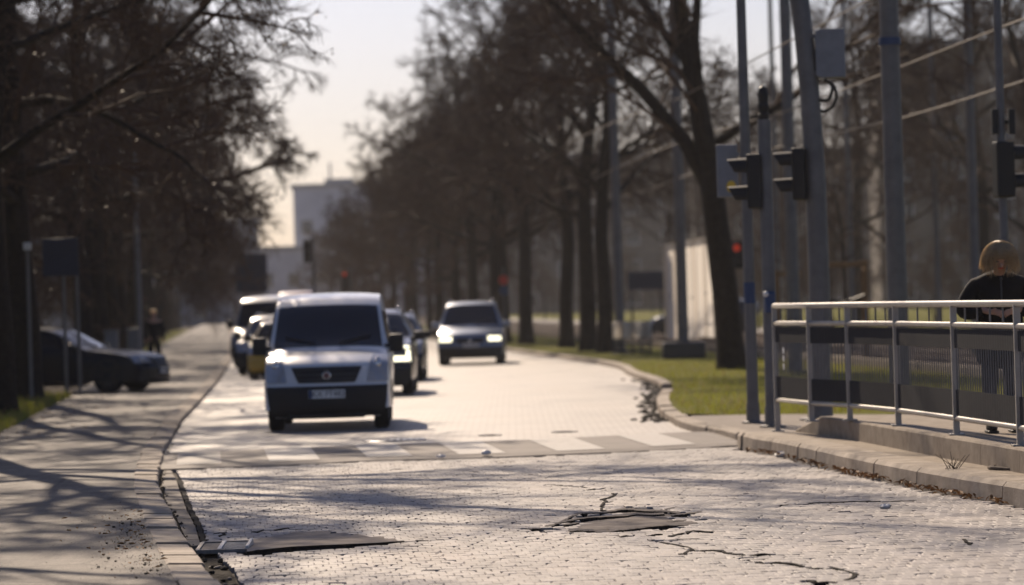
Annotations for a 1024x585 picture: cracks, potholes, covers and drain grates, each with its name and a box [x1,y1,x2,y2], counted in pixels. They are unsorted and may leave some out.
drain grate [195,538,254,554]
pothole [527,507,702,533]
crack [620,530,859,581]
